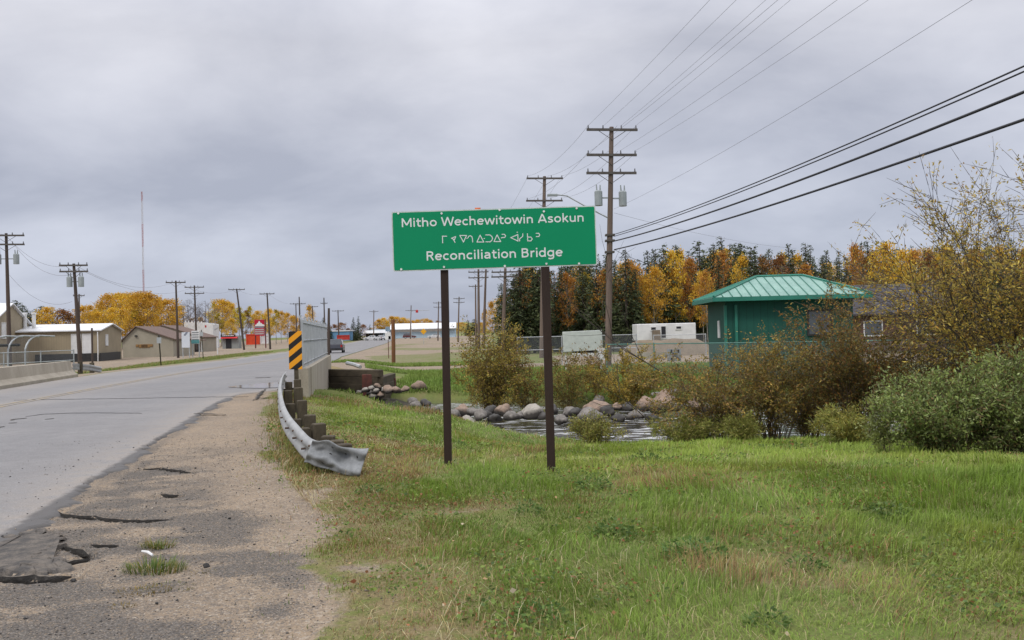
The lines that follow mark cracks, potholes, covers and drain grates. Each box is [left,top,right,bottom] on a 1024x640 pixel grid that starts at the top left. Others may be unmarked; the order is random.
crack [39,512,169,528]
